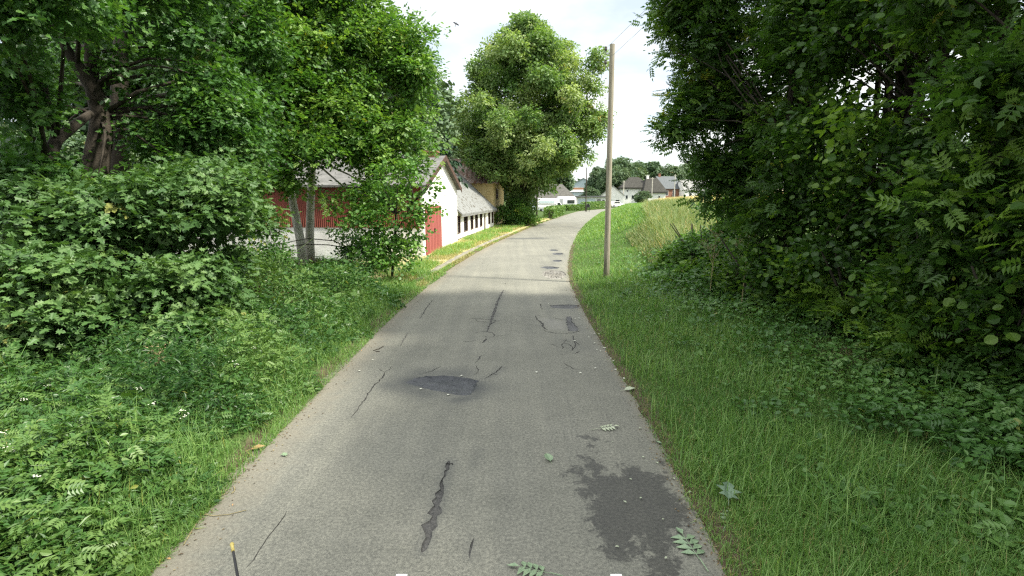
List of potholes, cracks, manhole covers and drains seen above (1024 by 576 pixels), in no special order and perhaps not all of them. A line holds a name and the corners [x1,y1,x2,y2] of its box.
crack [421,461,474,559]
crack [471,283,506,378]
crack [535,304,579,369]
crack [247,511,287,567]
crack [352,366,395,416]
